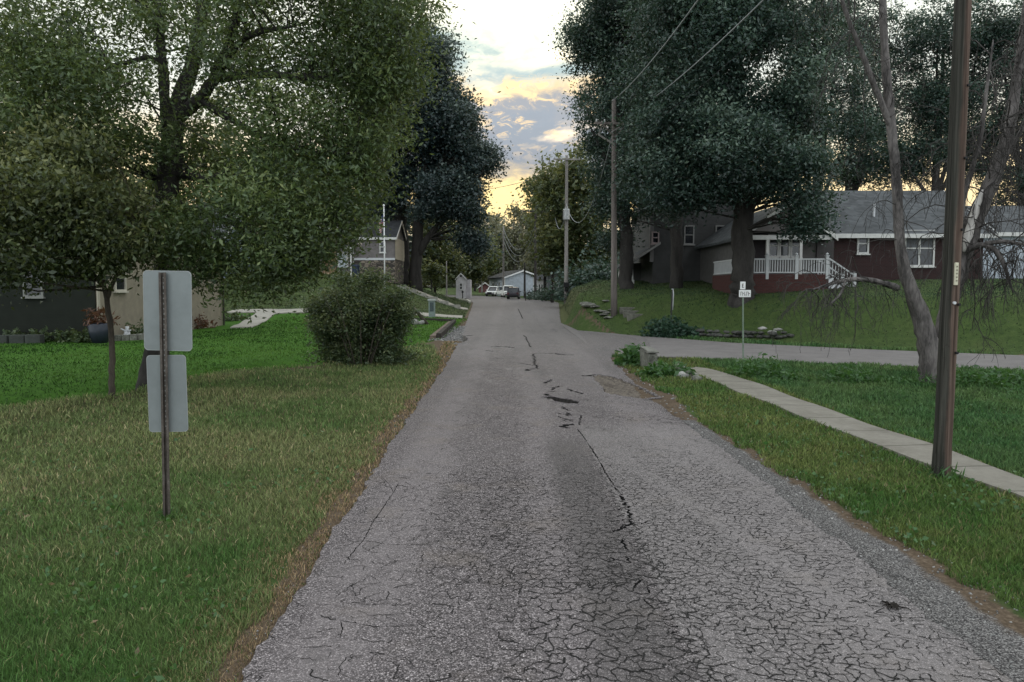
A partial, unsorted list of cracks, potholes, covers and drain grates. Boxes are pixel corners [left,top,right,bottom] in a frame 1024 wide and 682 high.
crack [242,335,1023,682]
